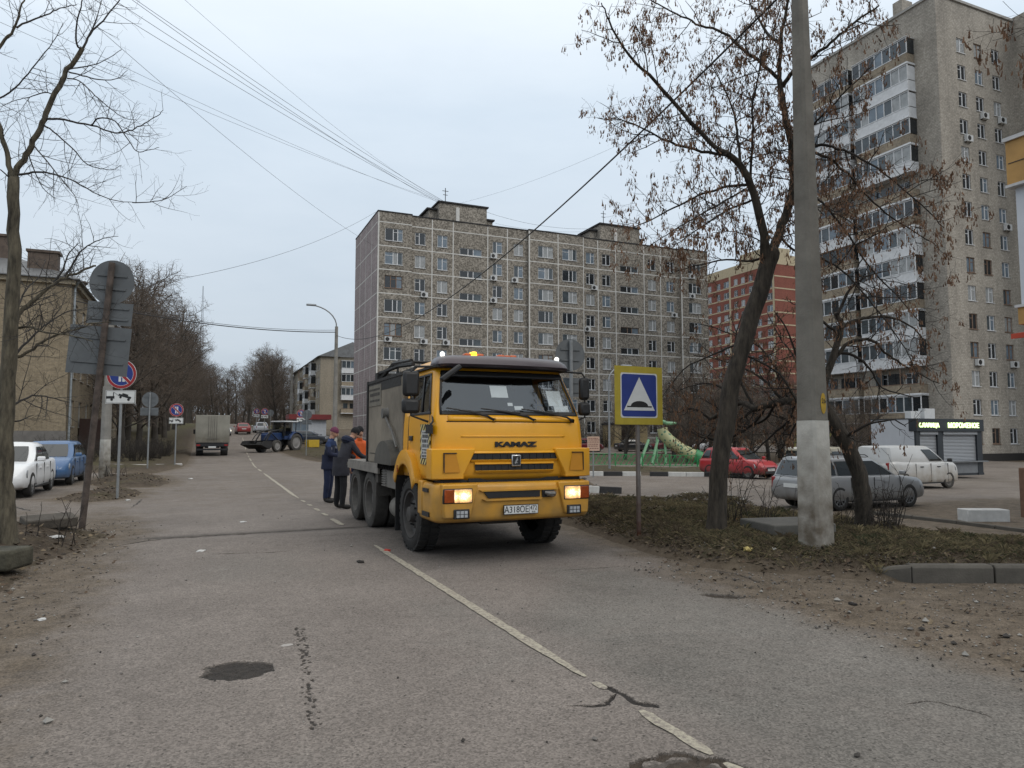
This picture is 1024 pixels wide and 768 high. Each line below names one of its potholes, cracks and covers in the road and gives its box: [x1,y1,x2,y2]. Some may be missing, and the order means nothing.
crack [517,669,702,736]
crack [261,619,389,746]
crack [858,683,1024,743]
